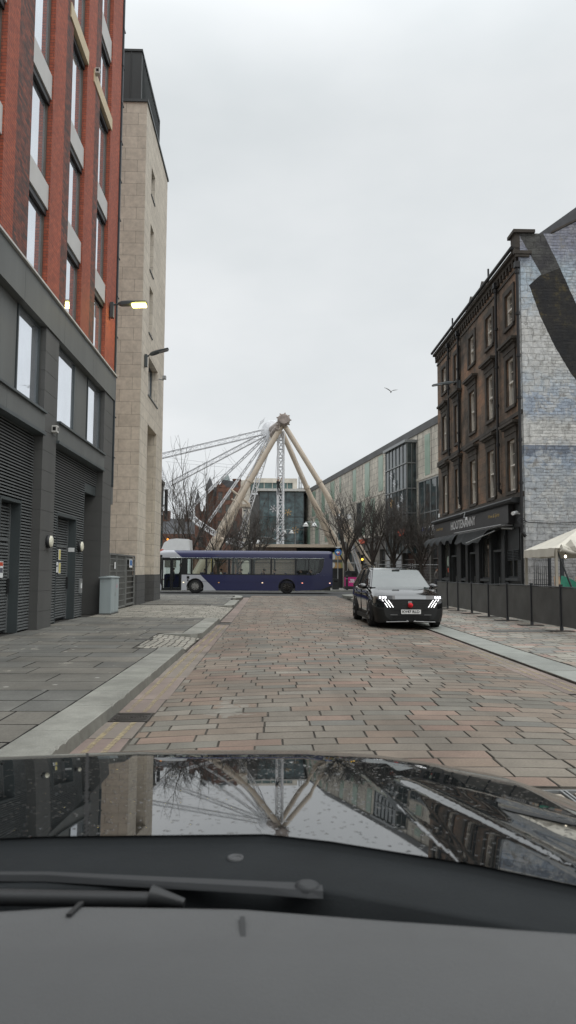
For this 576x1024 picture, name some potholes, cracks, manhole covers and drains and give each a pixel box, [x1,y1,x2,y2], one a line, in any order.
drain grate [108,713,154,723]
